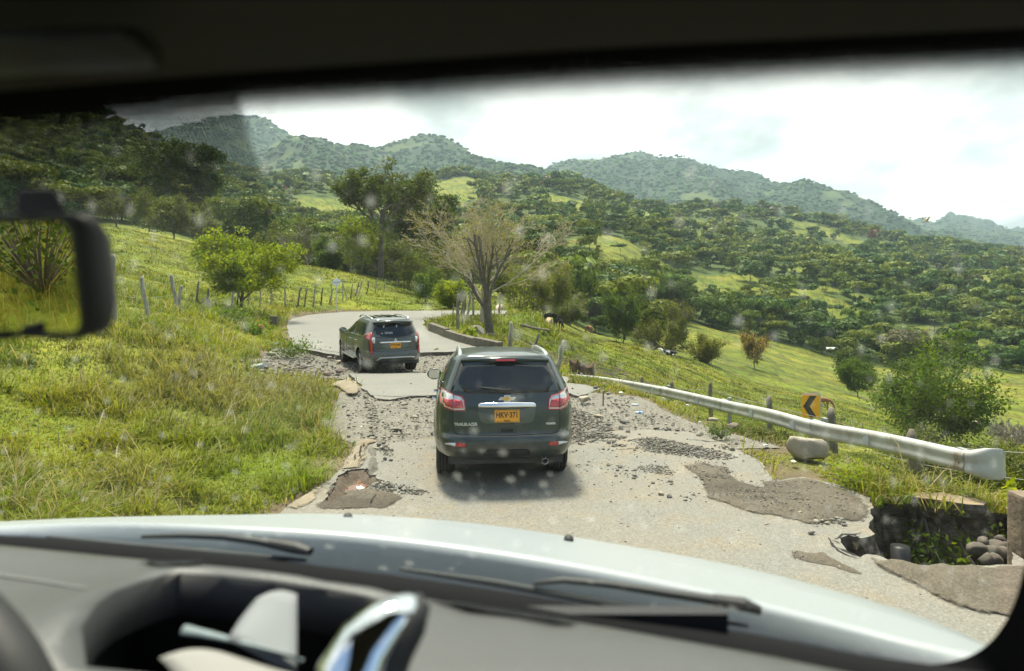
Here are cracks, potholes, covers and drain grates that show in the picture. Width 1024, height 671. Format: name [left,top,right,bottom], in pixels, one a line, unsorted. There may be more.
pothole [846,503,1013,566]
pothole [331,386,780,449]
pothole [326,470,378,502]
